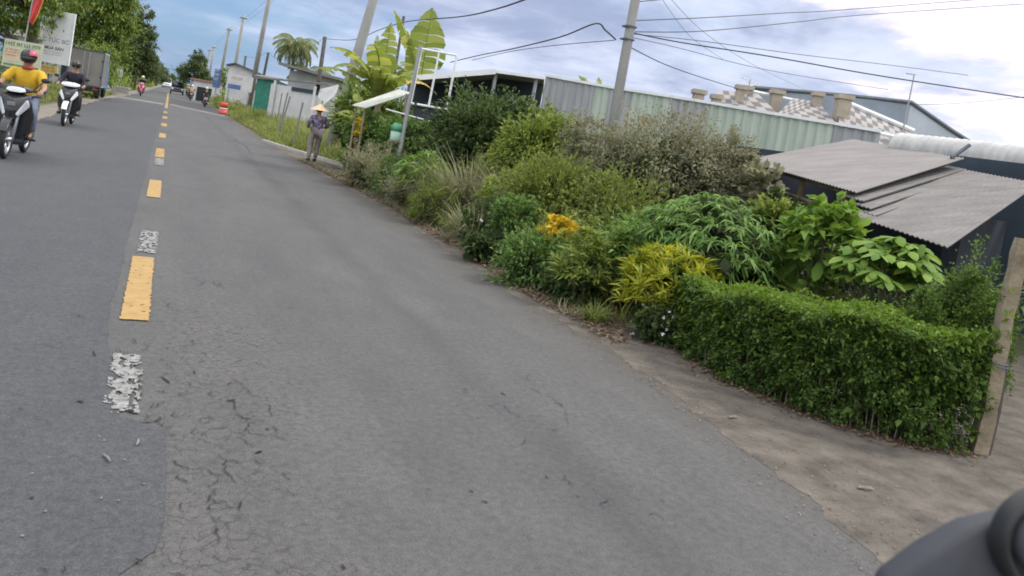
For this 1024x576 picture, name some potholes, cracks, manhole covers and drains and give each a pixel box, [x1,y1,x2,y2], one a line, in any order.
crack [99,341,288,539]
